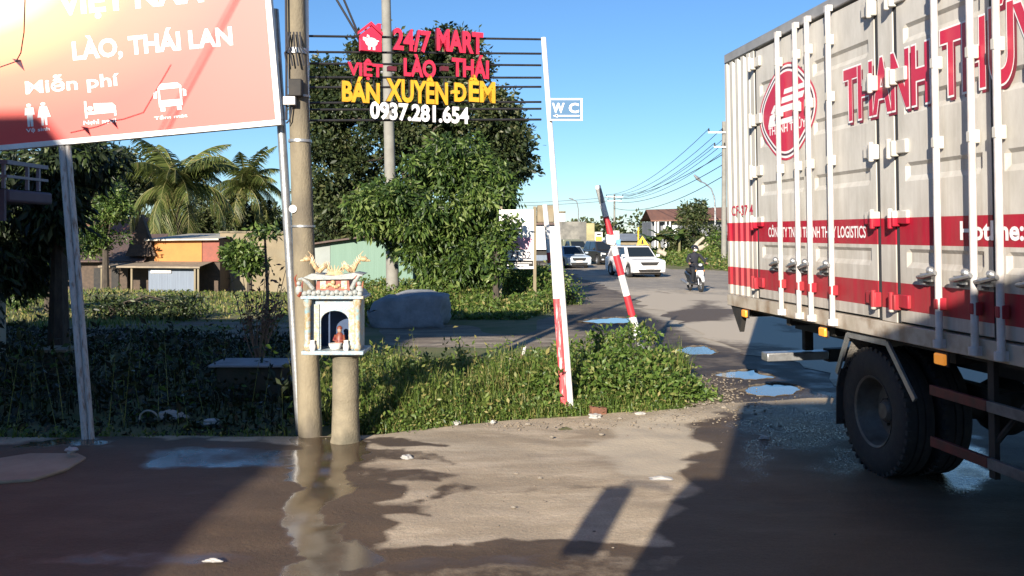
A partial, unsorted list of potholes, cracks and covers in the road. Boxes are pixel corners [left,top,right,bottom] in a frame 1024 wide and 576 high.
pothole [577,316,629,324]
pothole [677,345,719,355]
pothole [711,369,776,380]
pothole [739,382,805,397]
